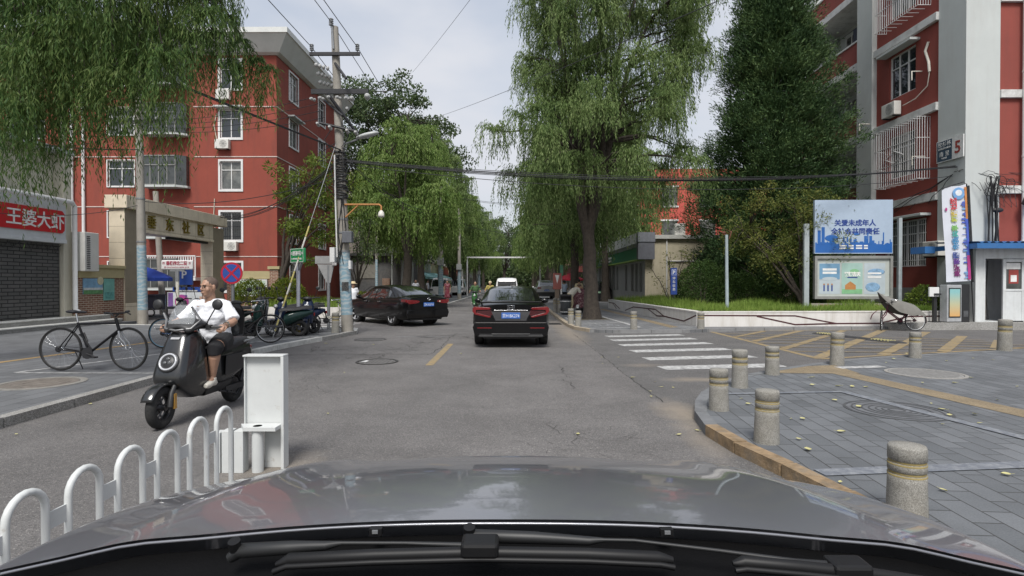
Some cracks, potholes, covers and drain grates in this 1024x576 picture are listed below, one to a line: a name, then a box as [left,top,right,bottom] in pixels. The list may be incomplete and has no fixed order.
manhole cover [884,368,969,379]
manhole cover [843,400,956,422]
manhole cover [0,376,88,391]
